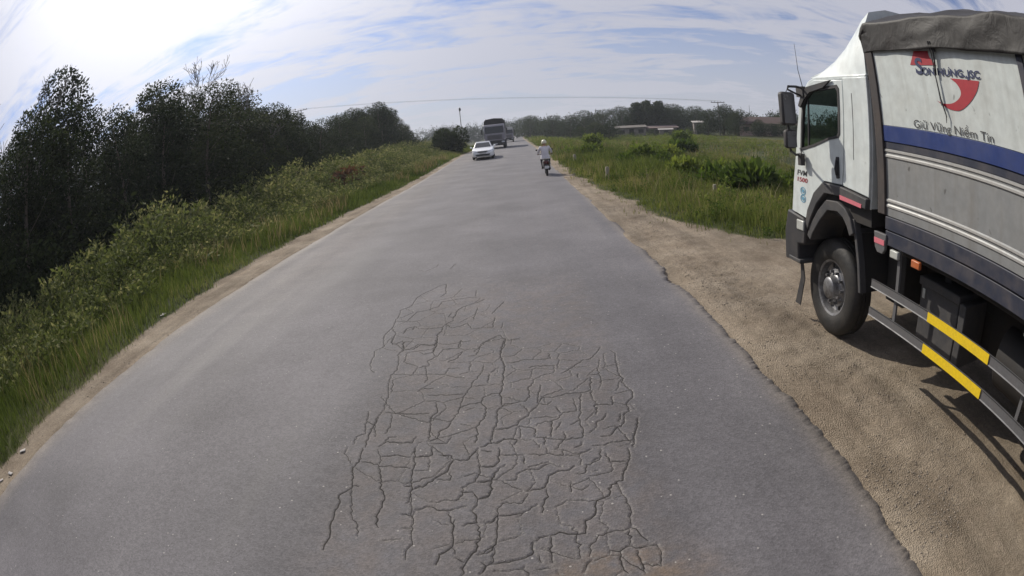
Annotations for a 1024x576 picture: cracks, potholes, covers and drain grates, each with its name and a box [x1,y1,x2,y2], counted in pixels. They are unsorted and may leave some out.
crack [323,264,662,576]
